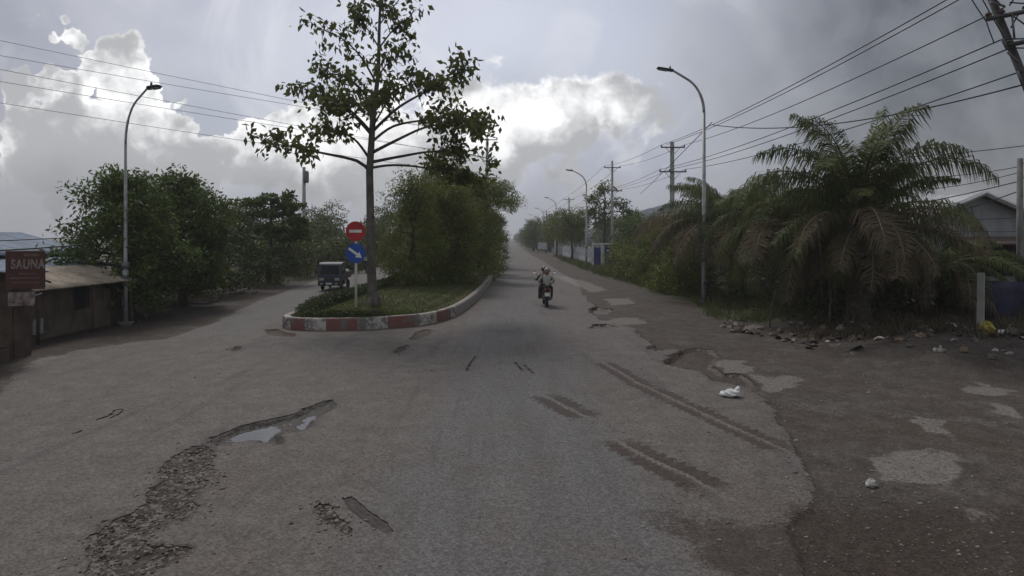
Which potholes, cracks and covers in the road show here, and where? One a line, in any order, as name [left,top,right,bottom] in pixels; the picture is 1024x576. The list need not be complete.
crack [72,409,124,434]
pothole [289,496,387,548]
pothole [409,329,433,340]
pothole [58,438,246,576]
pothole [663,348,755,388]
pothole [195,400,337,449]
pothole [588,306,613,314]
